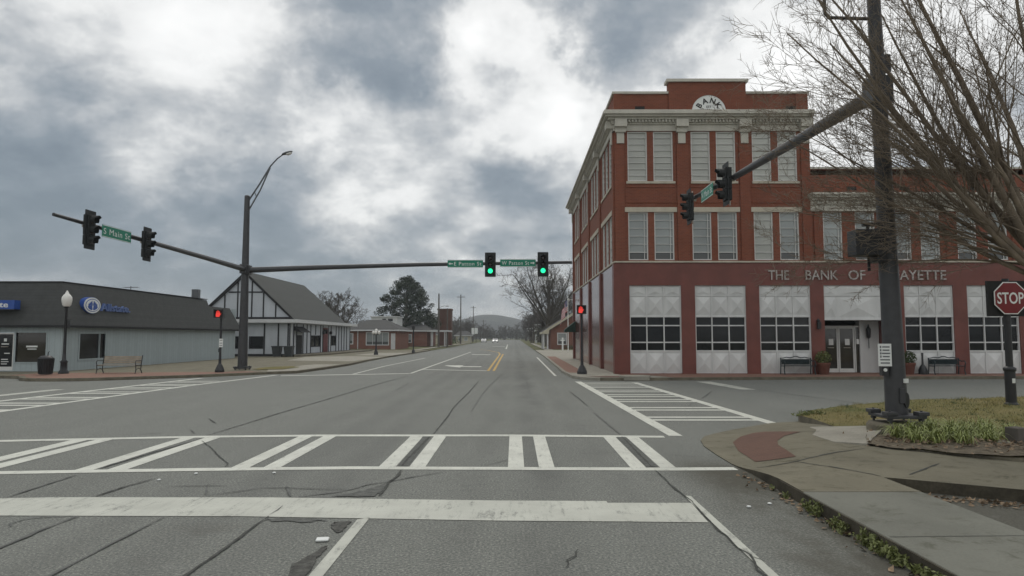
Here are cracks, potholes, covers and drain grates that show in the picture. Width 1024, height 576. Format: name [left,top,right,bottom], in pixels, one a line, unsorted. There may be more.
crack [183,376,494,576]
crack [0,516,165,576]
crack [572,393,767,576]
